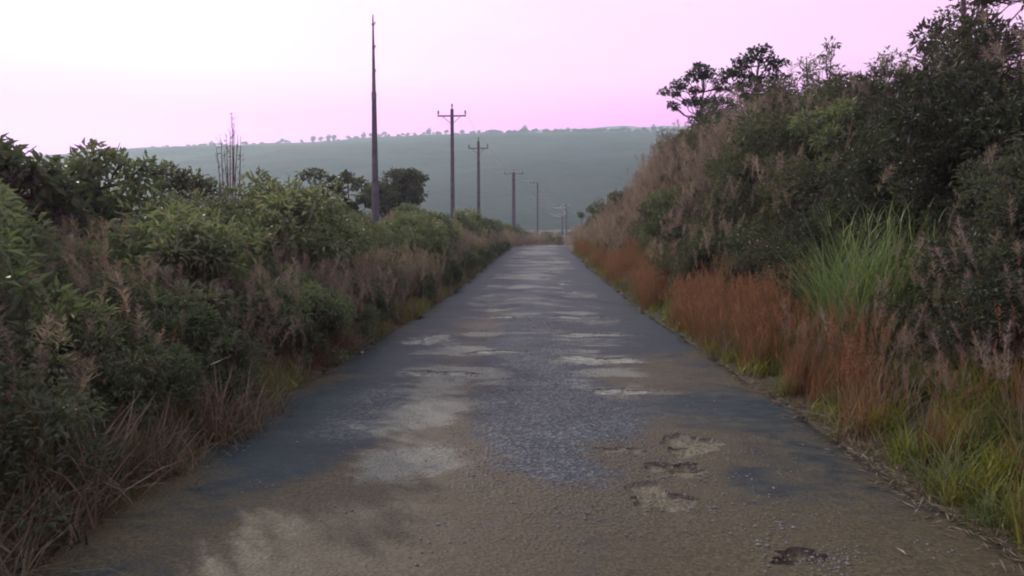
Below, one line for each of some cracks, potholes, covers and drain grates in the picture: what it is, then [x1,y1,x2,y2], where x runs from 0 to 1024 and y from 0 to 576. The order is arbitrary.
pothole [623,481,702,512]
pothole [770,546,830,566]
pothole [659,432,725,459]
pothole [641,462,708,478]
